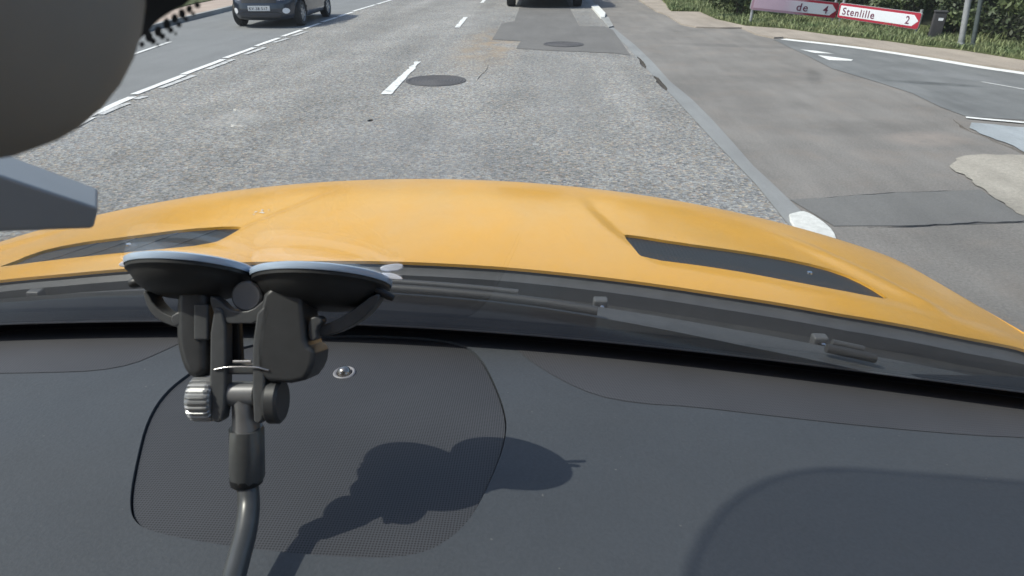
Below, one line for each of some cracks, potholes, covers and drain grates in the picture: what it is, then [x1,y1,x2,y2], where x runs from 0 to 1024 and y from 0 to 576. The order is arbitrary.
manhole cover [406,75,466,86]
